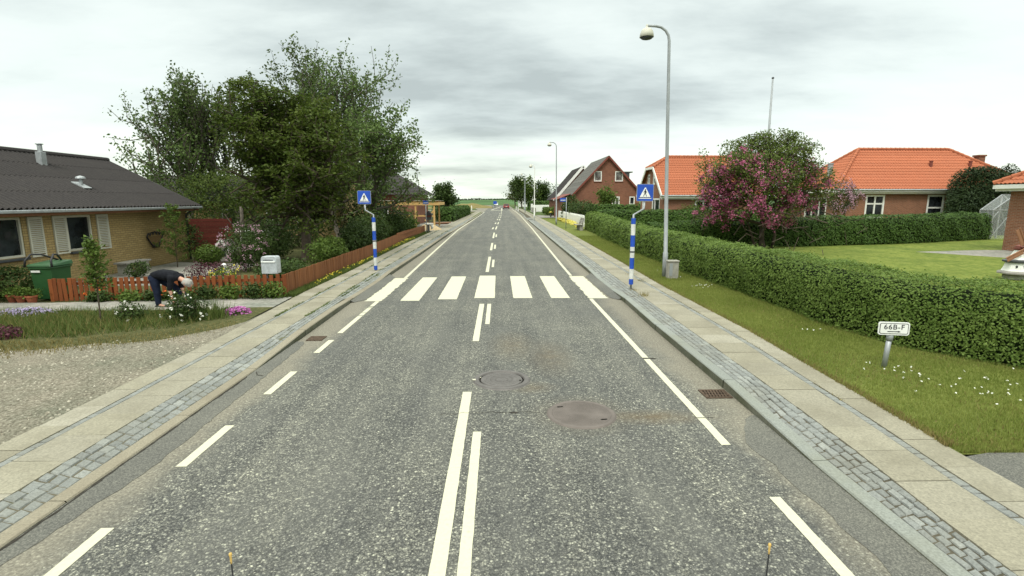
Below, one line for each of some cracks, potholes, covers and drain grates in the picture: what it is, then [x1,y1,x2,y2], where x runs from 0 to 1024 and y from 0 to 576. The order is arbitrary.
manhole cover [547,400,617,430]
drain grate [698,389,733,399]
manhole cover [473,370,530,391]
